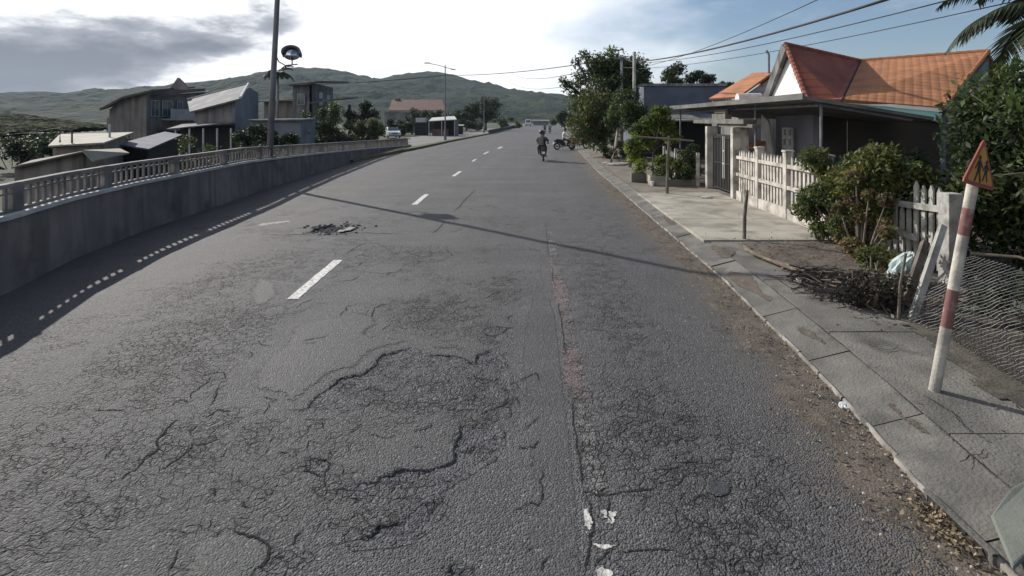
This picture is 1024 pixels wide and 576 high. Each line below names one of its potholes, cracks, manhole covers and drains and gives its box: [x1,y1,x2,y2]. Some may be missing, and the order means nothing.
crack [0,372,287,547]
crack [213,228,643,569]
crack [63,246,311,401]
crack [558,303,841,576]
